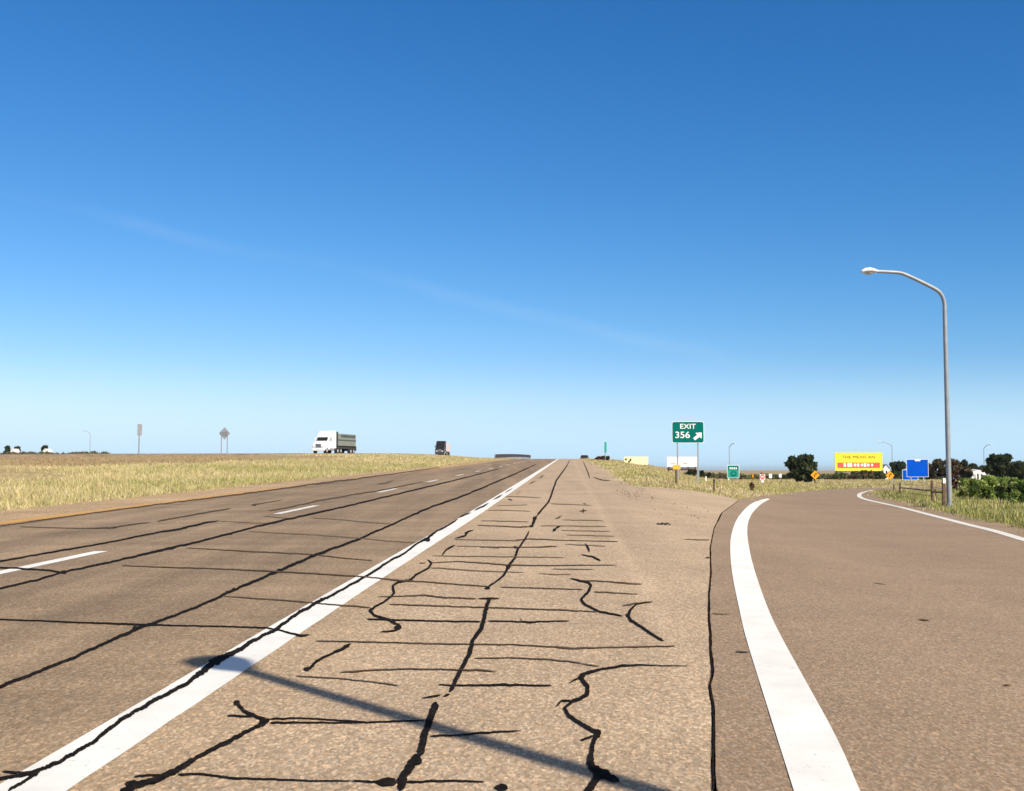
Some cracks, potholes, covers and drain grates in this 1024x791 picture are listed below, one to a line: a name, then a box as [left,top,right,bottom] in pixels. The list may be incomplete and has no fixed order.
crack [0,460,690,791]
